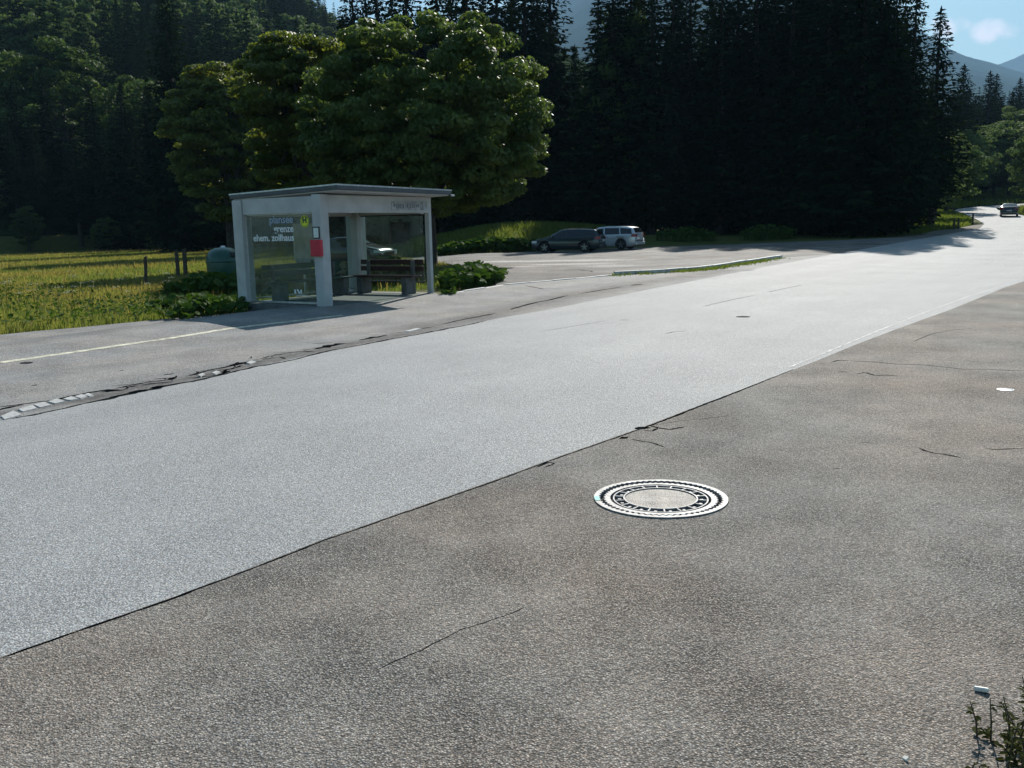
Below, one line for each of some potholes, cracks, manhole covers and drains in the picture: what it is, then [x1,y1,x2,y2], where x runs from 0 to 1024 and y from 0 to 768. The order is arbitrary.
crack [833,360,1014,376]
crack [0,370,791,670]
manhole cover [594,479,728,519]
